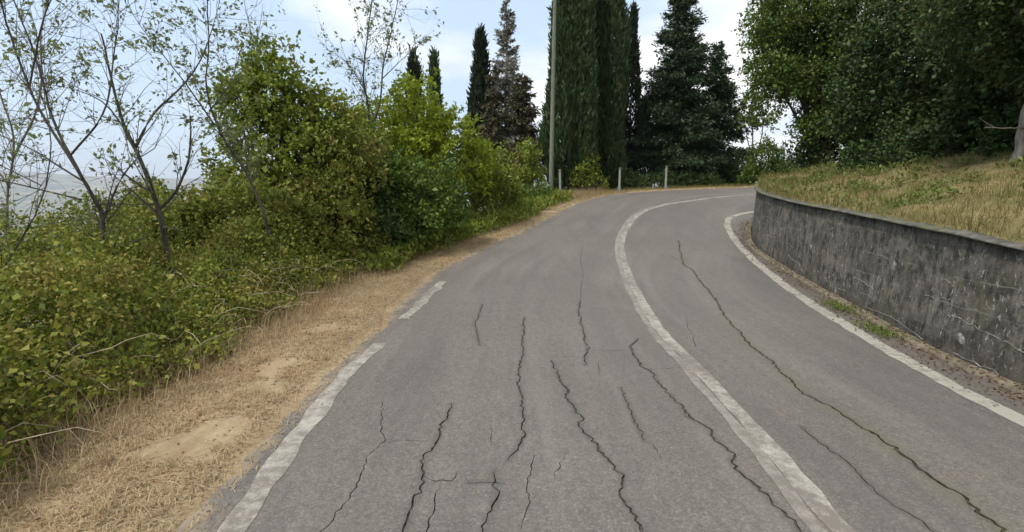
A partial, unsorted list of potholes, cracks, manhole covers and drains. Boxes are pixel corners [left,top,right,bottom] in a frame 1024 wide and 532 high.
crack [474,317,534,532]
crack [551,244,1007,532]
crack [320,402,457,532]
